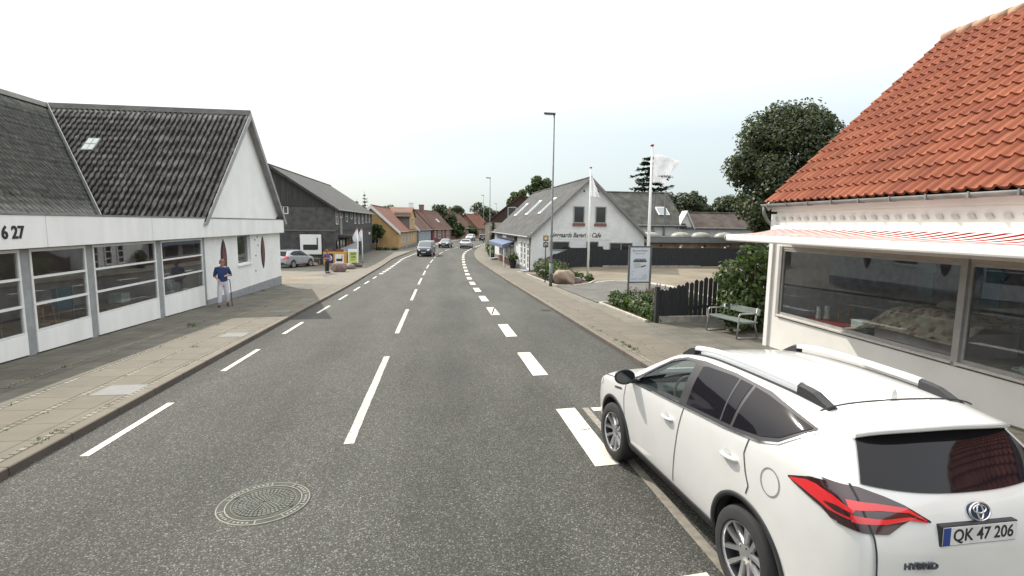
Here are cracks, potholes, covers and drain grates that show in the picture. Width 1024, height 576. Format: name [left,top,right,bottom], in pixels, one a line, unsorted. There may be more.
manhole cover [215,482,312,527]
